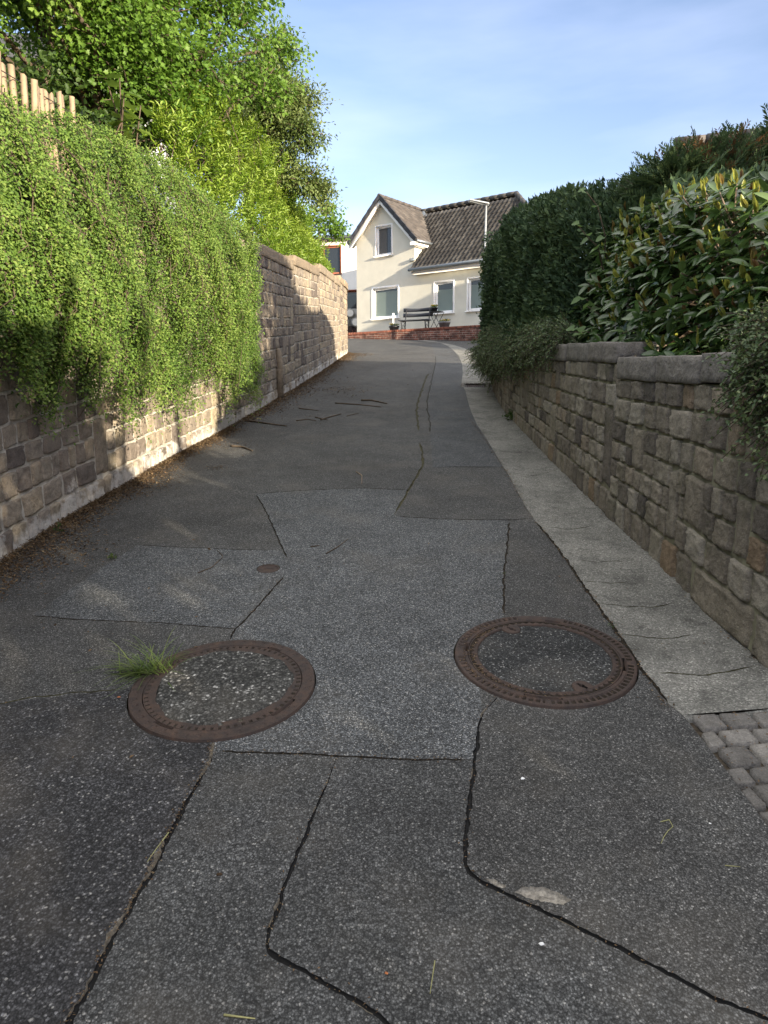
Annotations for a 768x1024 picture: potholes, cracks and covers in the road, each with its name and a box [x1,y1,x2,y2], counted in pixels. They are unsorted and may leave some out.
manhole cover [128,640,315,743]
utility cover [257,564,280,573]
manhole cover [454,616,638,710]
crack [147,357,520,613]
crack [65,524,768,1024]
